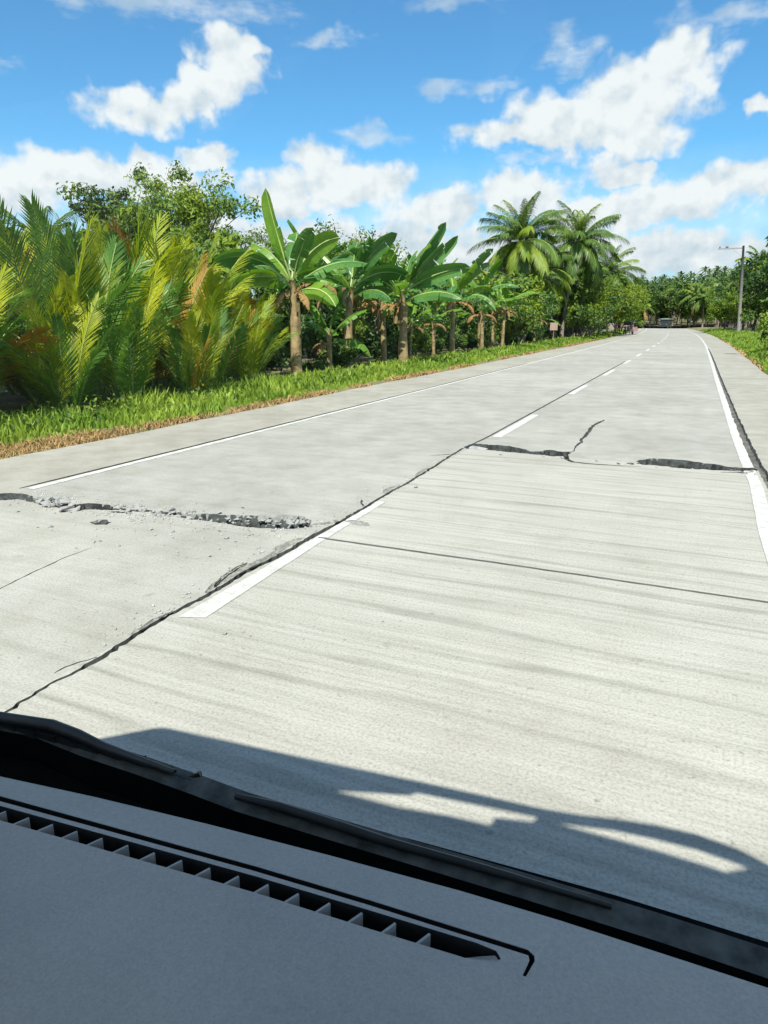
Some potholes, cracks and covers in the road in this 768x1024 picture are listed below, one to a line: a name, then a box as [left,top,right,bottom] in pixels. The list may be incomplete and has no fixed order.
crack [0,363,527,712]
crack [563,420,641,467]
